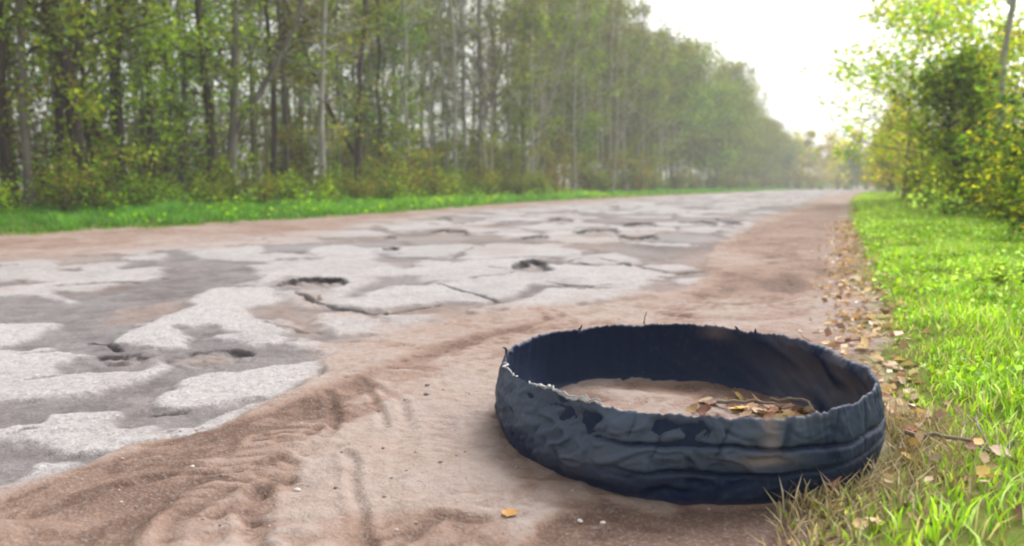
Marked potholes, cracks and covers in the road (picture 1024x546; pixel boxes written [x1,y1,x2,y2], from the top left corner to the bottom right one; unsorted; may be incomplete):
pothole [499,257,562,276]
pothole [149,343,269,374]
crack [251,264,505,336]
crack [533,257,717,289]
pothole [564,228,630,238]
pothole [264,275,358,293]
pothole [80,350,162,371]
